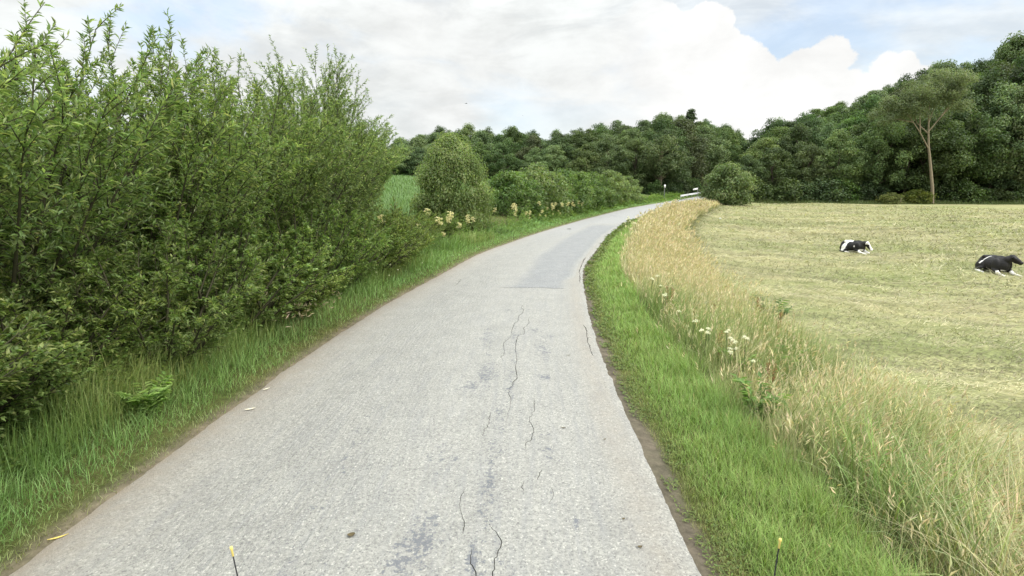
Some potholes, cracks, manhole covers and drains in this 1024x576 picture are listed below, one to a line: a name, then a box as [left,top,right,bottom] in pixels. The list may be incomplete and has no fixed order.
crack [503,305,529,409]
crack [470,524,502,576]
